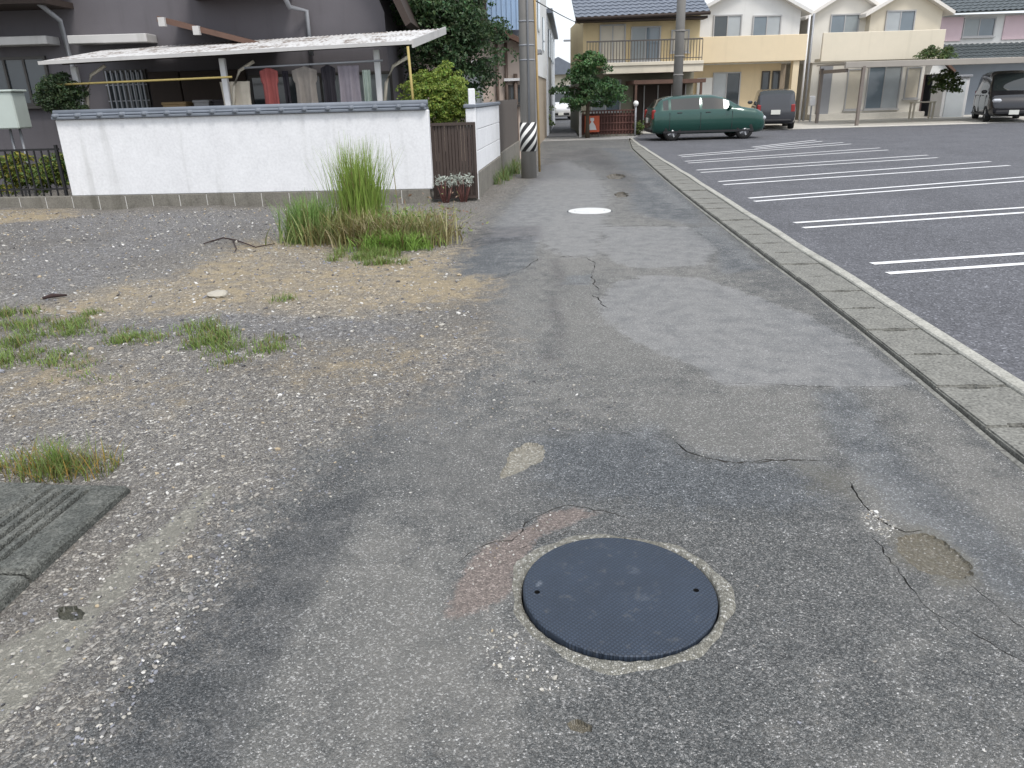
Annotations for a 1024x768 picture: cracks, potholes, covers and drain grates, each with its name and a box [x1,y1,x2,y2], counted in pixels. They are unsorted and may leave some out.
crack [674,441,835,463]
crack [485,256,606,307]
pothole [56,606,85,621]
crack [849,481,1024,662]
manhole cover [512,534,736,675]
pothole [896,533,974,580]
crack [450,505,639,568]
